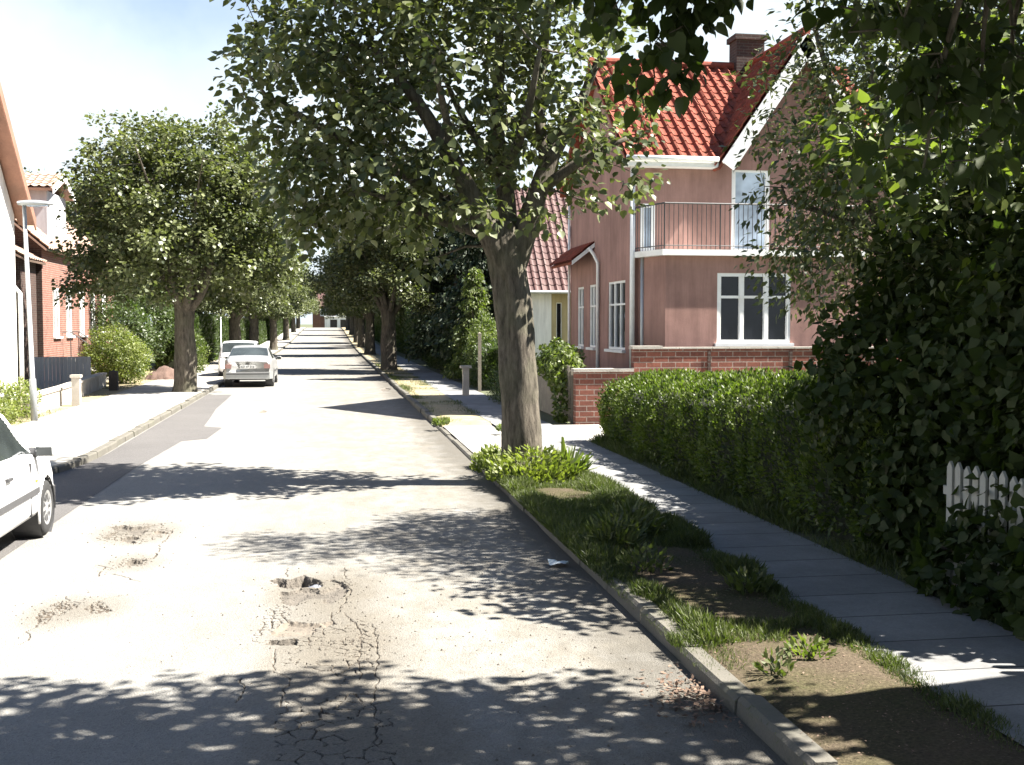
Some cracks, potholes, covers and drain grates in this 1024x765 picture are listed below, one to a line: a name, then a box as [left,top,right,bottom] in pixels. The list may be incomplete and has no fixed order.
crack [252,567,396,765]
pothole [103,525,155,539]
pothole [270,575,350,606]
